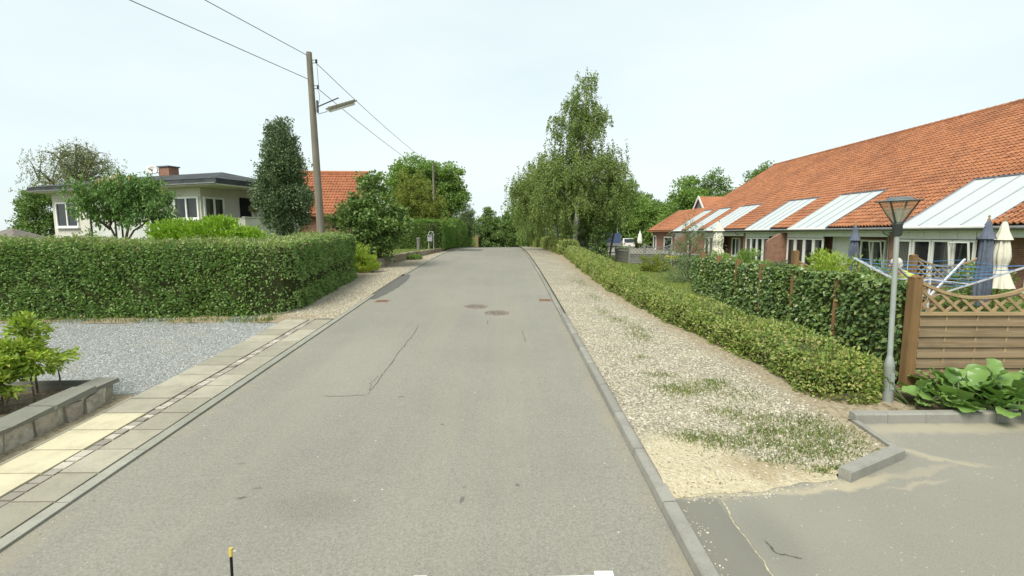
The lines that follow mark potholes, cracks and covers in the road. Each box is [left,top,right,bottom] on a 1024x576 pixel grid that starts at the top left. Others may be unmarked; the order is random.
crack [351,325,419,396]
crack [715,492,803,576]
